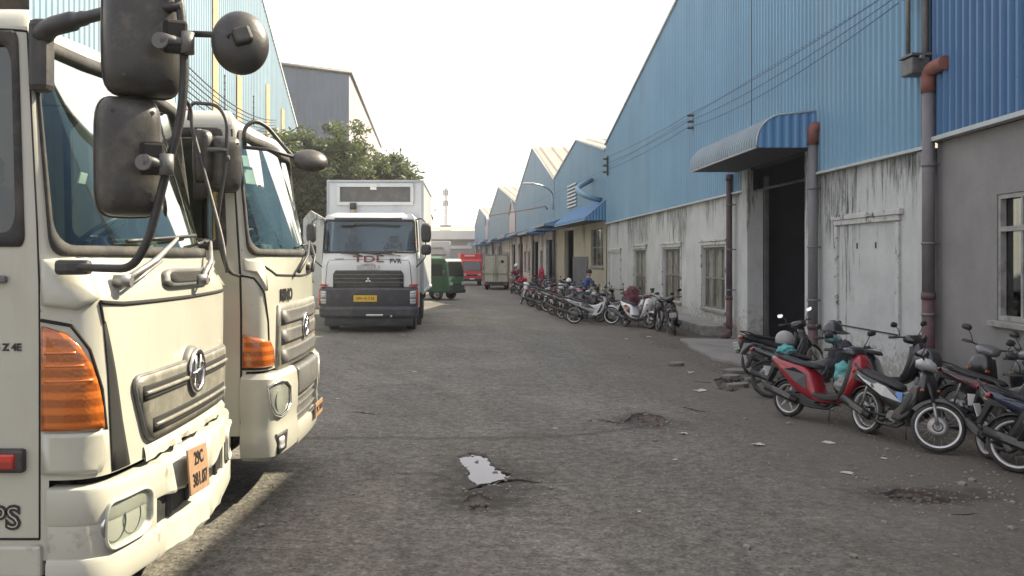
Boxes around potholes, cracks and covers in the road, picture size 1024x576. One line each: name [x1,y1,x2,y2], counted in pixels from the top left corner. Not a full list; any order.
pothole [454,451,514,487]
pothole [876,489,955,505]
pothole [623,411,670,427]
crack [468,479,540,490]
